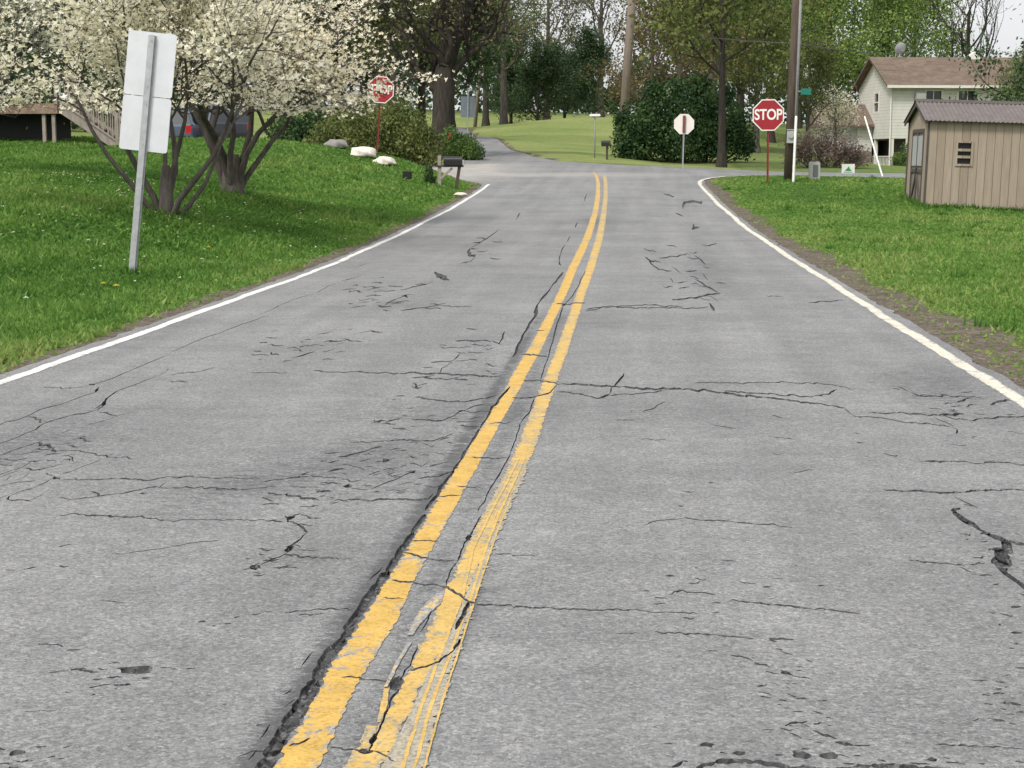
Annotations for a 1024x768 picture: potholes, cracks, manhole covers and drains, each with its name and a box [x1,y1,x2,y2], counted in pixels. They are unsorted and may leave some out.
crack [0,194,1024,768]
